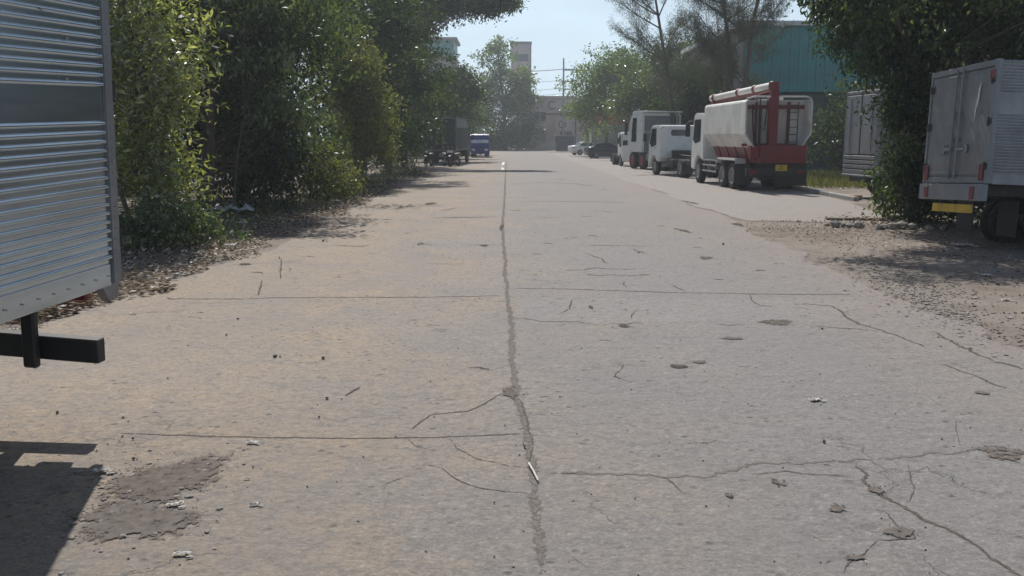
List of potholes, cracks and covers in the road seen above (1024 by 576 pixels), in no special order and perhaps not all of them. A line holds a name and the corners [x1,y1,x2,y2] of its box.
pothole [882,524,918,539]
crack [811,304,1023,388]
crack [384,388,545,493]
pothole [975,445,1024,462]
crack [754,462,1021,576]
